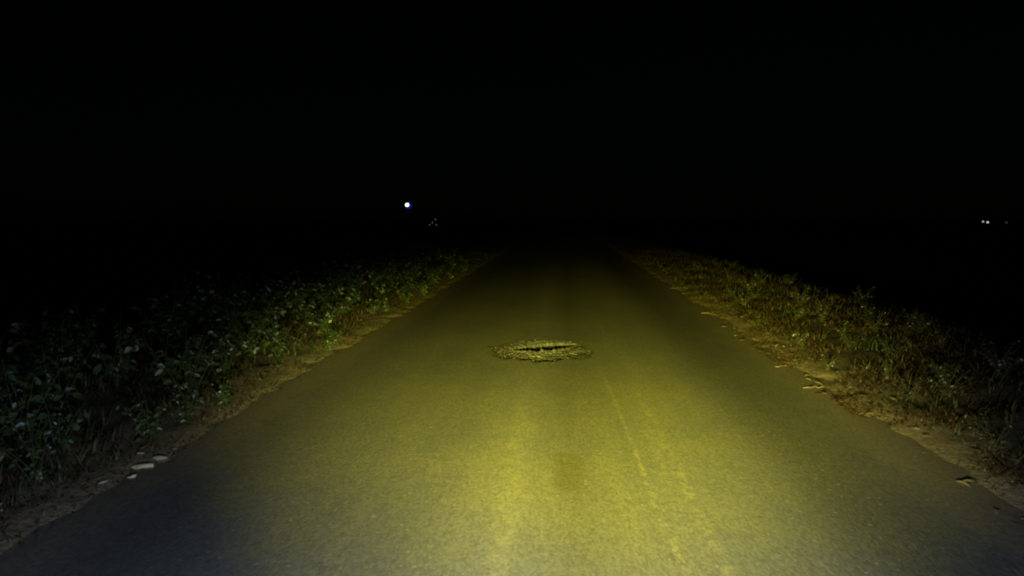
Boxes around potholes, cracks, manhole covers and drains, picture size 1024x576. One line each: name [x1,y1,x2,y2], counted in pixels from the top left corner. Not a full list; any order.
pothole [488,338,594,364]
